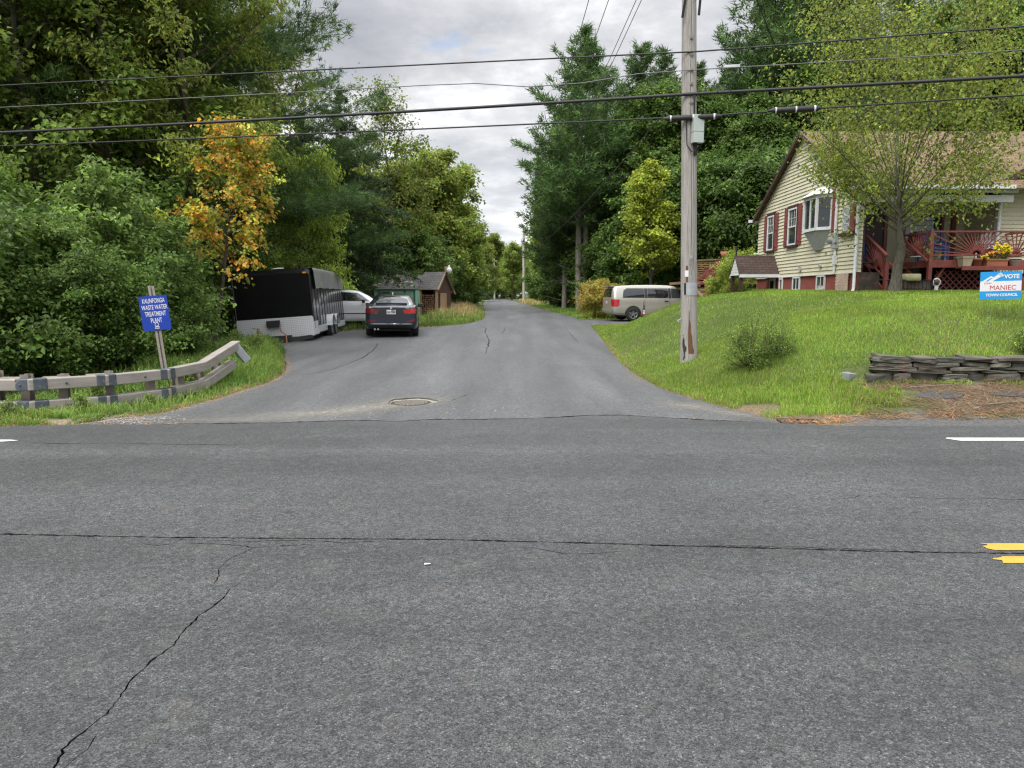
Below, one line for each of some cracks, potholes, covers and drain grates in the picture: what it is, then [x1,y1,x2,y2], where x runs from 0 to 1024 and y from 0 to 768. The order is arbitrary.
crack [0,533,1024,768]
manhole cover [389,398,438,406]
